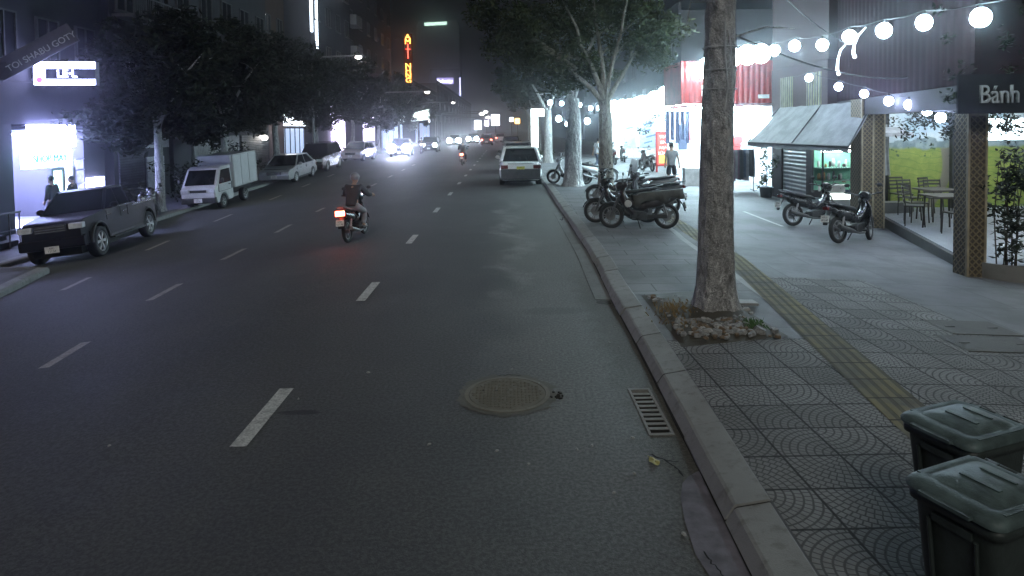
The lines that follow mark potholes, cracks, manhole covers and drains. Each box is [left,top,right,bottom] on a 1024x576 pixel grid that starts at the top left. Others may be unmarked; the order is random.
drain grate [628,388,675,436]
manhole cover [455,374,557,417]
